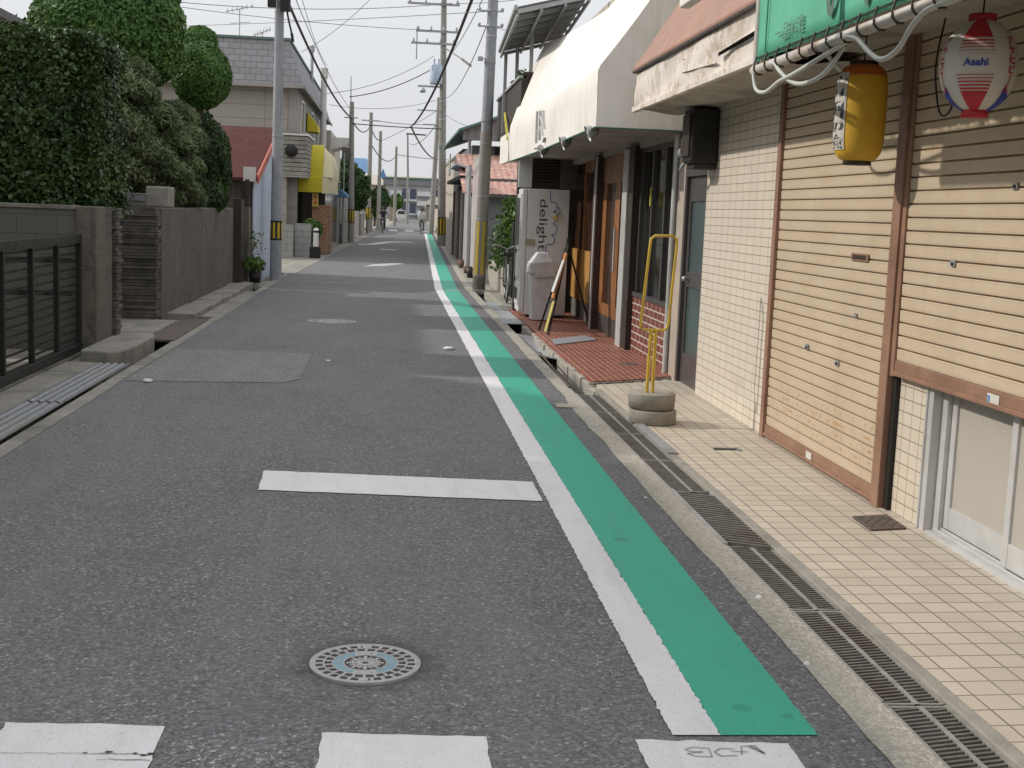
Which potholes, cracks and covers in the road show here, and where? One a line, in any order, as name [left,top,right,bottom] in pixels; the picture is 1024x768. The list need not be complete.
drain grate [789,608,945,706]
drain grate [726,545,840,611]
drain grate [669,488,771,551]
drain grate [640,458,708,495]
manhole cover [309,644,421,686]
drain grate [883,703,1017,768]
drain grate [614,432,673,461]
